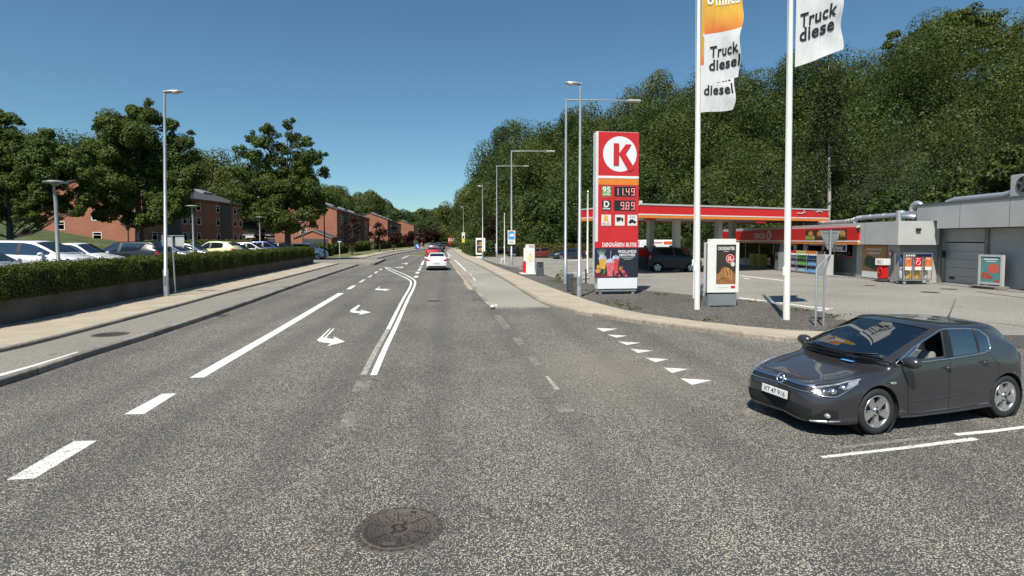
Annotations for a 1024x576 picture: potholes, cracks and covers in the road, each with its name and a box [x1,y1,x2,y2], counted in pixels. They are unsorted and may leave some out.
manhole cover [353,507,443,554]
